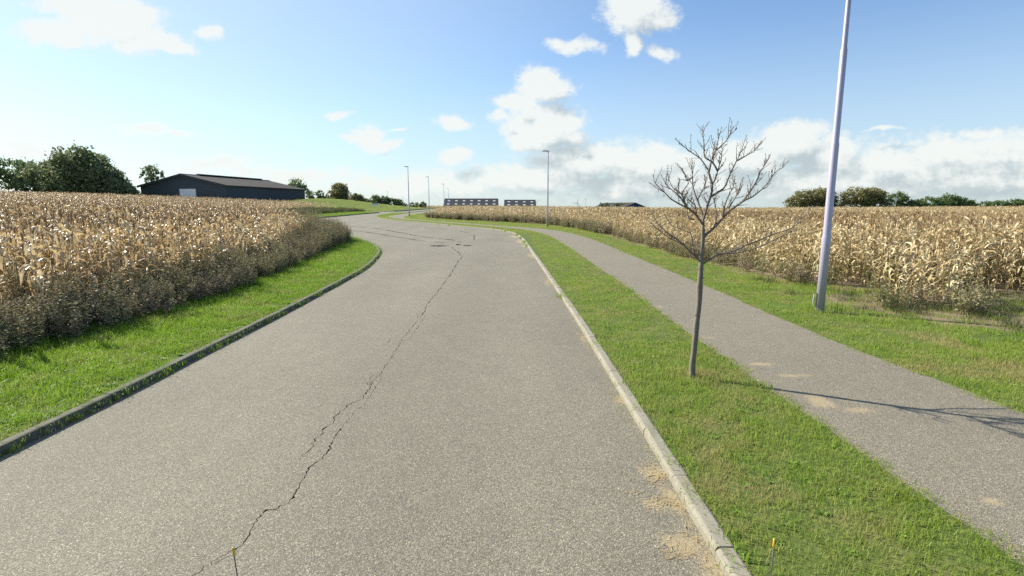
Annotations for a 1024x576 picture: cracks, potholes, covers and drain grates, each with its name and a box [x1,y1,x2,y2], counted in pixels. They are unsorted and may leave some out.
crack [192,243,461,576]
crack [350,226,476,243]
